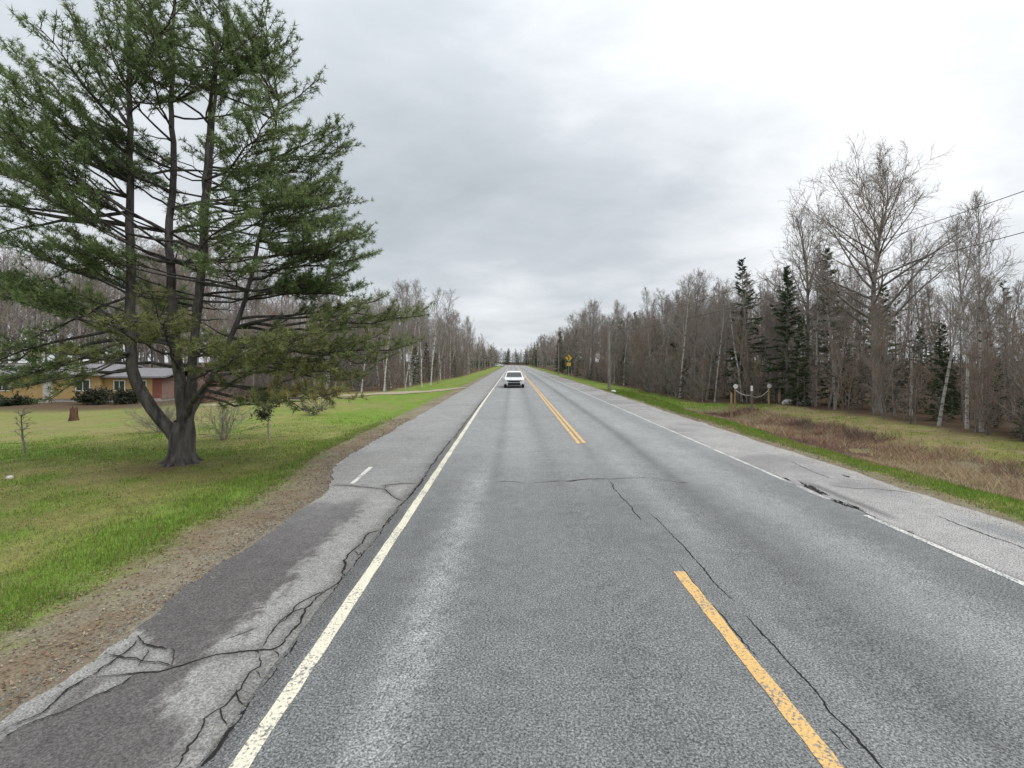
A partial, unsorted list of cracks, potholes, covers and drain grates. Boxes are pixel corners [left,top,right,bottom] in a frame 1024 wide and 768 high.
crack [0,577,343,768]
crack [498,477,883,768]
